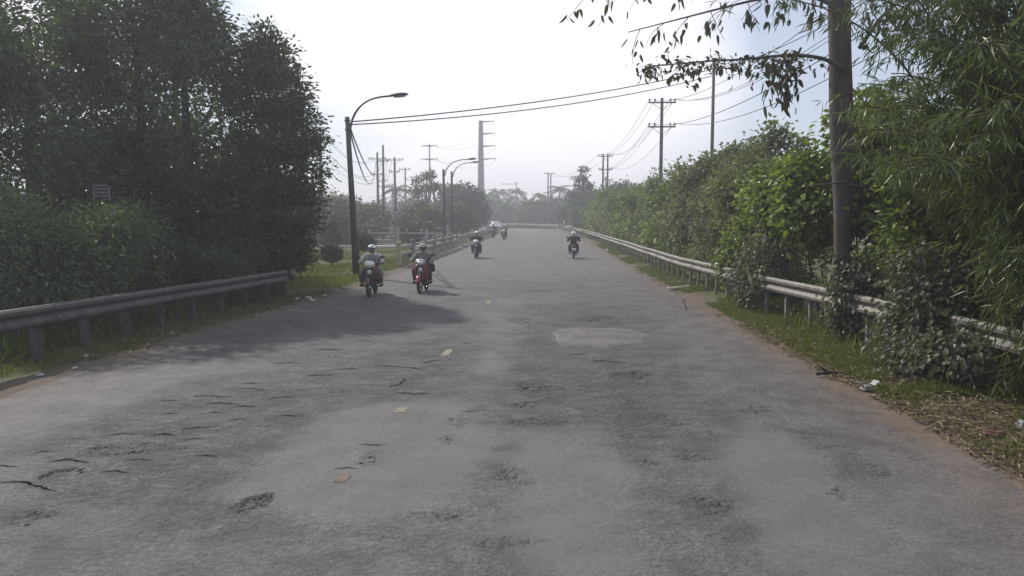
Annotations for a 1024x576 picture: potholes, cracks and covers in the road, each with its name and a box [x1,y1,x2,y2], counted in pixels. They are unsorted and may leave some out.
crack [0,383,305,528]
pothole [228,492,276,516]
crack [335,444,385,470]
crack [275,349,440,395]
